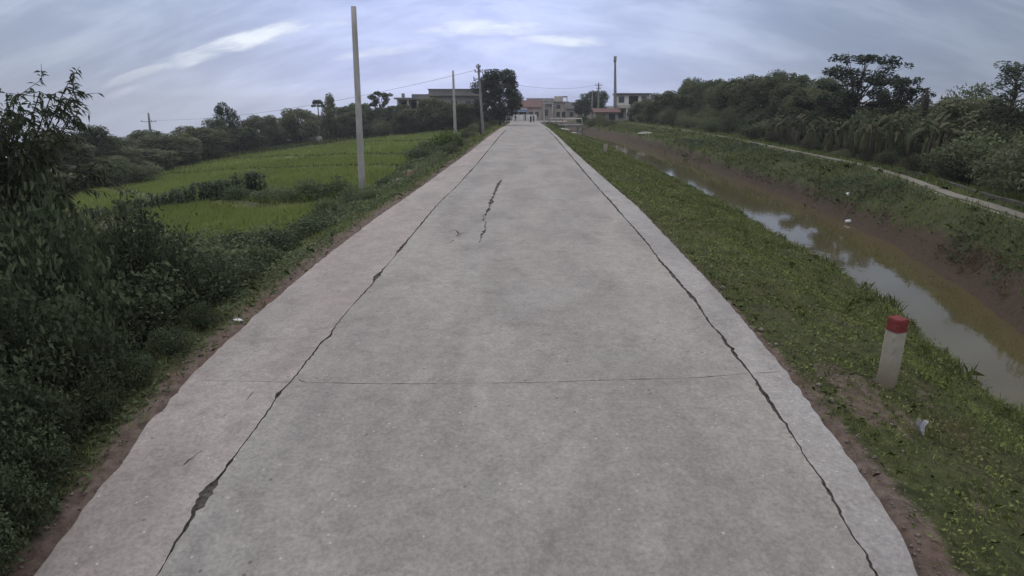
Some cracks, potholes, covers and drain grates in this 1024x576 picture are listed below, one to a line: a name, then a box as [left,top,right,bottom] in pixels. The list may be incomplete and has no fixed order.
crack [448,180,504,244]
